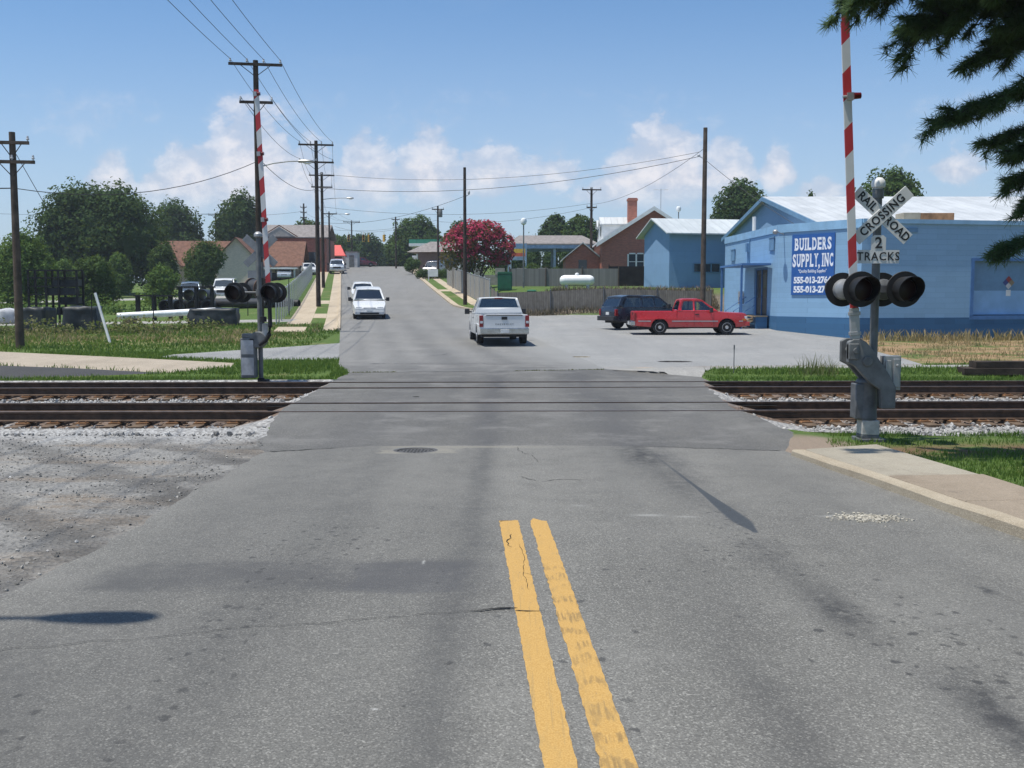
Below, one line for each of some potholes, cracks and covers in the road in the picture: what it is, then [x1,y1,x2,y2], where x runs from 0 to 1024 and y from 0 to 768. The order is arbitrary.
crack [0,607,537,650]
